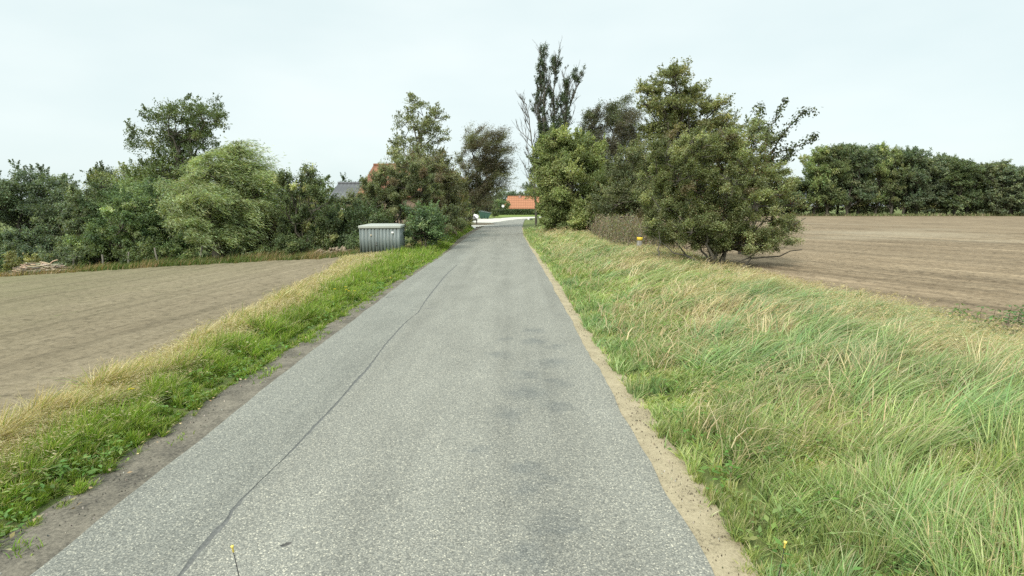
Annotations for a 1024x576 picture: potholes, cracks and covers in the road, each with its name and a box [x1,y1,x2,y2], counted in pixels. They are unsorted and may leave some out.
crack [178,265,457,576]
